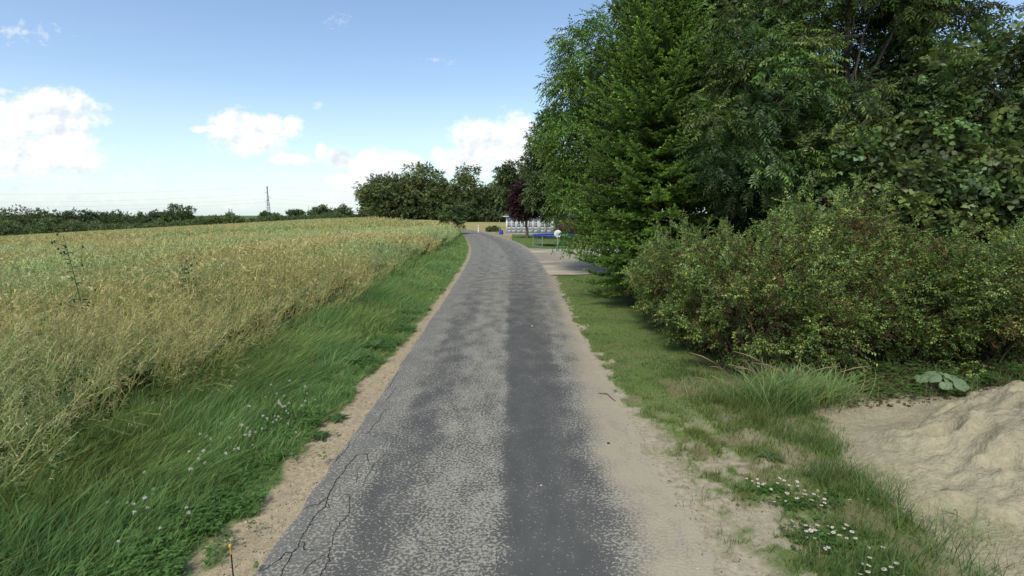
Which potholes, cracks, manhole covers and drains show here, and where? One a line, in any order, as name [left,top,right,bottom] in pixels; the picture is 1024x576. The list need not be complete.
crack [264,444,377,576]
